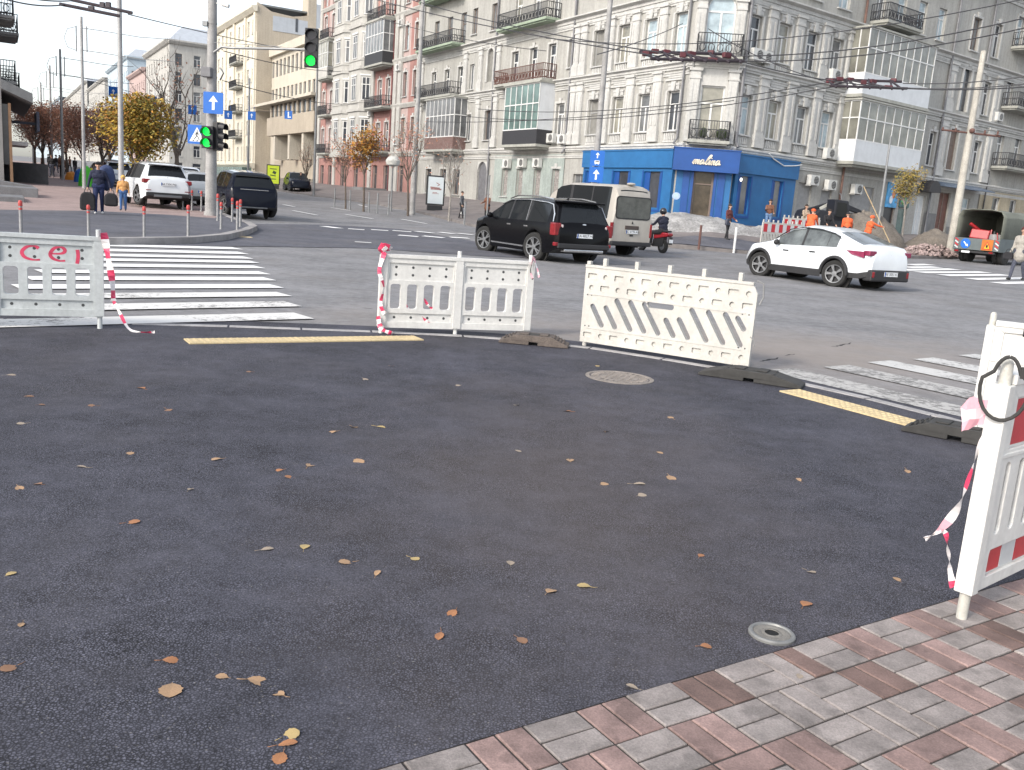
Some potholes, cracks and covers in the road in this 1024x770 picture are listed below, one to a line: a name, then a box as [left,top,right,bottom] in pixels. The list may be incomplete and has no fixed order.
manhole cover [585,370,654,385]
